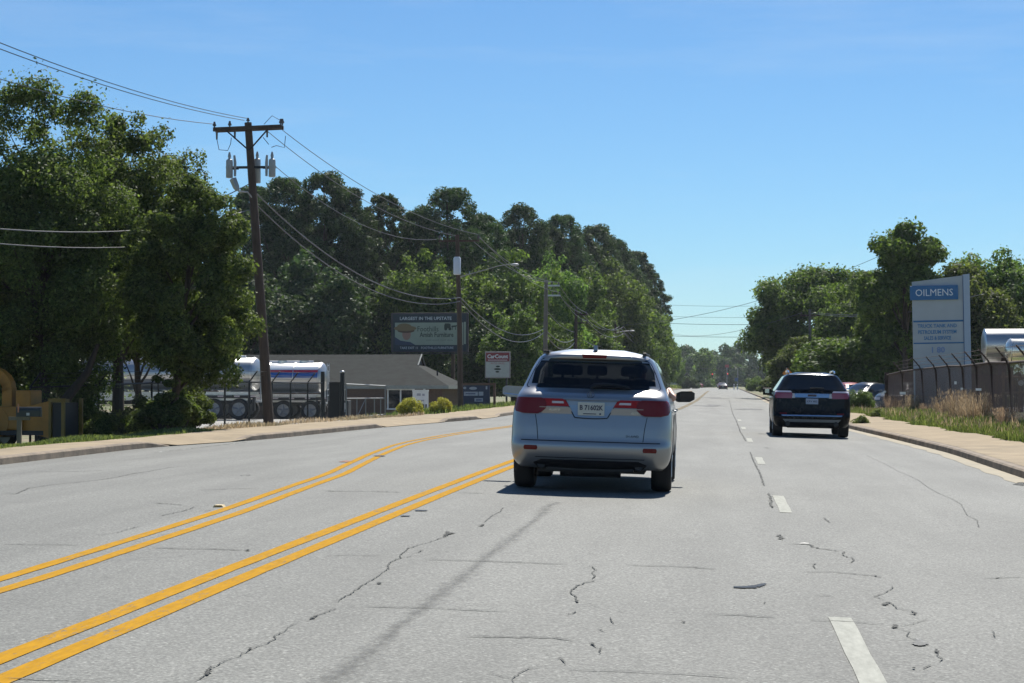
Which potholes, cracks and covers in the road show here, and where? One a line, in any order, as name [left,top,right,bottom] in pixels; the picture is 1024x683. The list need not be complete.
crack [196,533,562,680]
crack [793,543,956,681]
crack [557,565,733,677]
